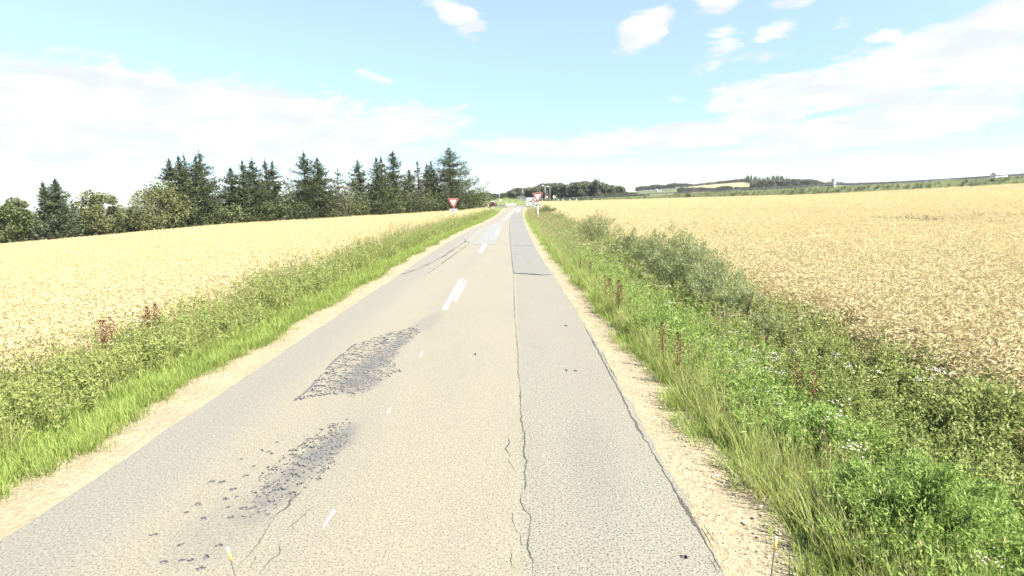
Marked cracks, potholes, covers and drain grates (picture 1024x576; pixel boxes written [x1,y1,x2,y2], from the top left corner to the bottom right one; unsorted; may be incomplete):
crack [505,231,552,573]
crack [238,491,312,569]
pothole [241,419,351,519]
crack [401,239,469,275]
pothole [293,325,418,401]
